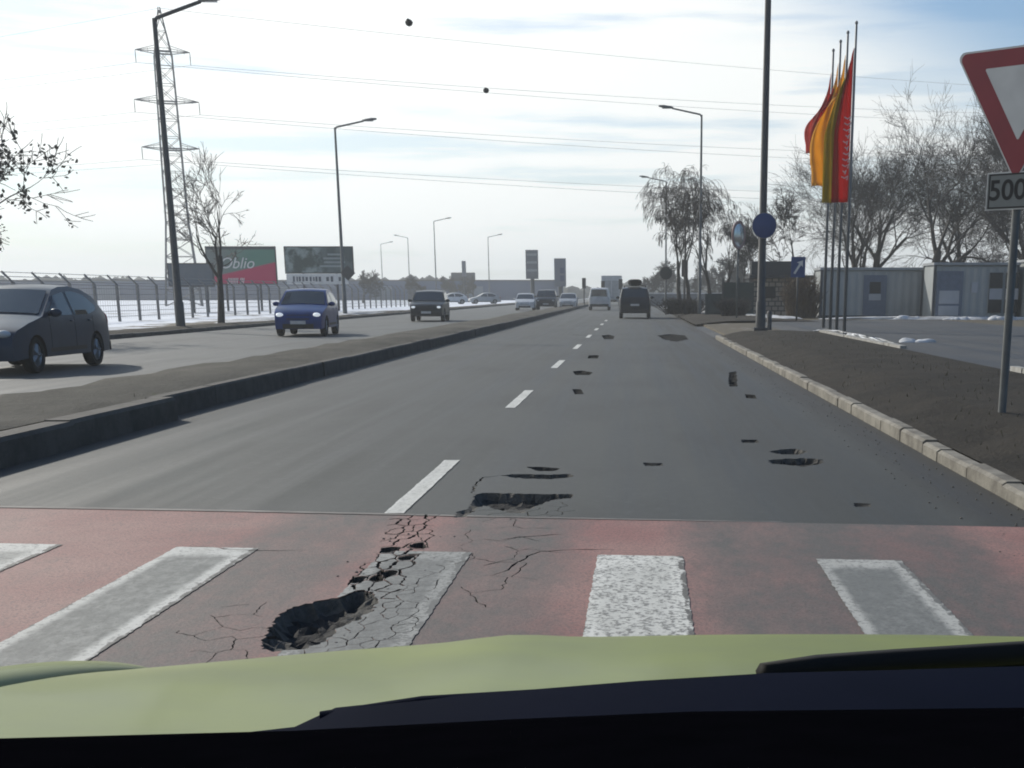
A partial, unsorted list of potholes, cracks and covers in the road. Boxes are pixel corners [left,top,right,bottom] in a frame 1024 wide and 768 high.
pothole [728,371,738,387]
pothole [261,591,378,653]
pothole [454,493,573,518]
crack [194,608,276,659]
crack [304,516,445,654]
pothole [658,334,688,342]
pothole [768,458,824,467]
crack [462,502,575,607]
